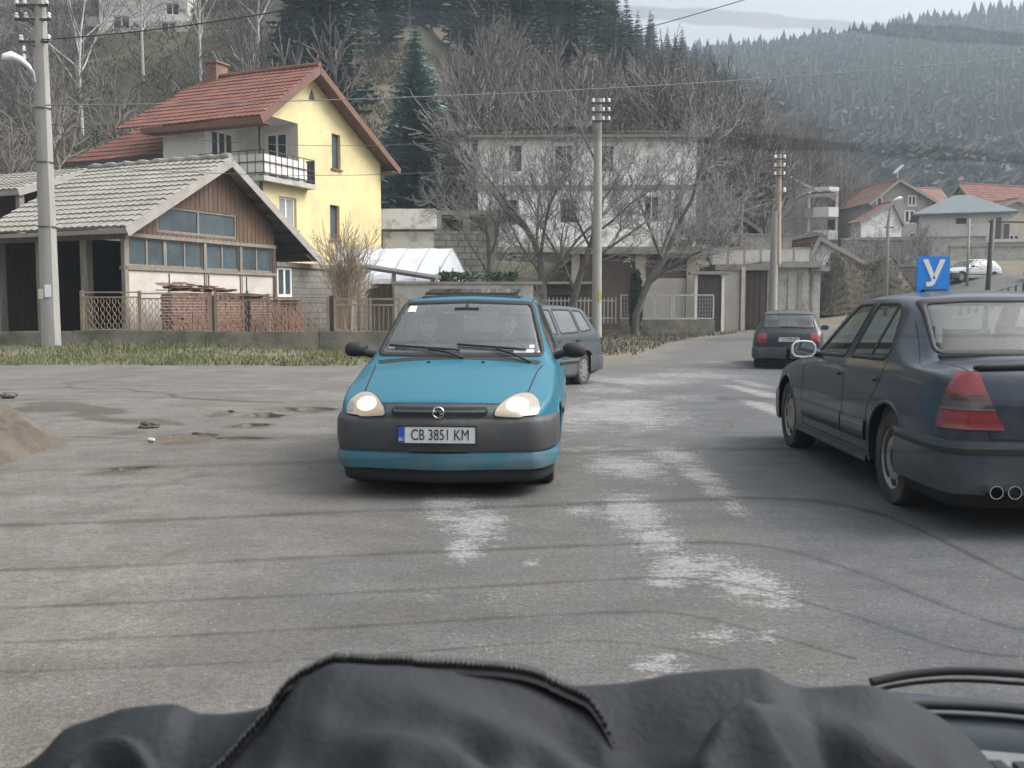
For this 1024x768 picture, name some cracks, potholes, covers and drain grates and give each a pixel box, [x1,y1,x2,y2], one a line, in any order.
pothole [140,432,222,445]
